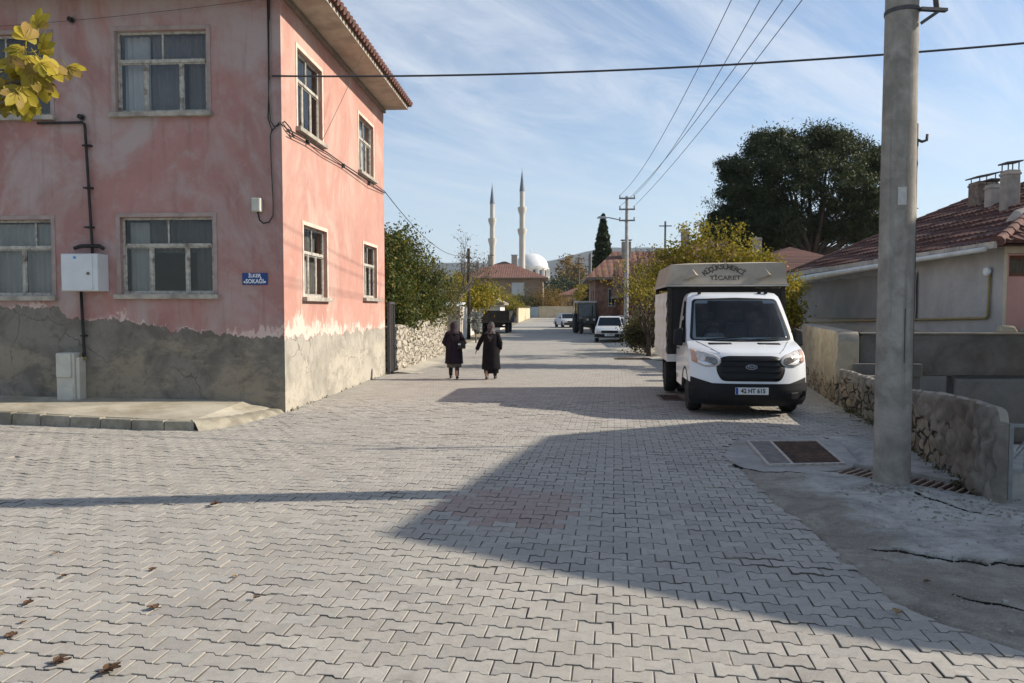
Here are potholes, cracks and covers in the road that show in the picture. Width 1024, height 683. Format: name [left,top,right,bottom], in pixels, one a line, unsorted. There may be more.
crack [952,594,1024,611]
crack [868,549,1024,568]
drain grate [836,462,971,495]
